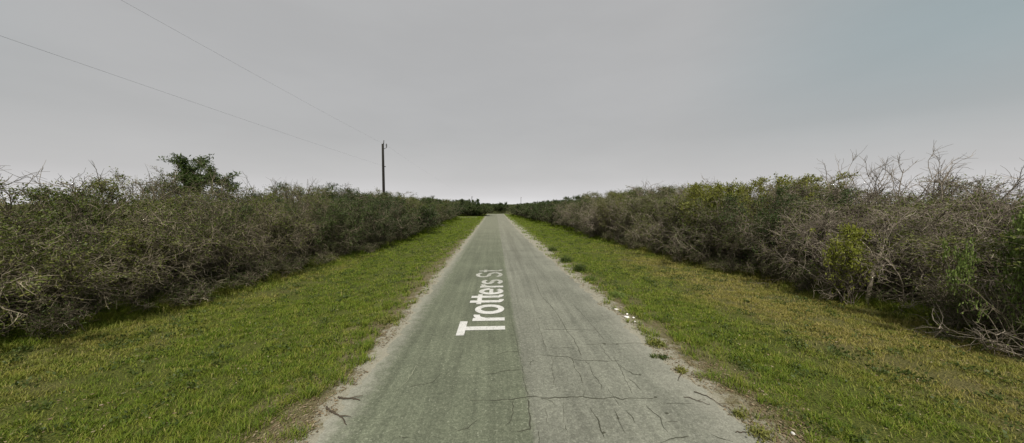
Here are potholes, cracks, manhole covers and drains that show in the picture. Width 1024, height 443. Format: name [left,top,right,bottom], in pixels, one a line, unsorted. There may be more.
crack [488,282,688,443]
